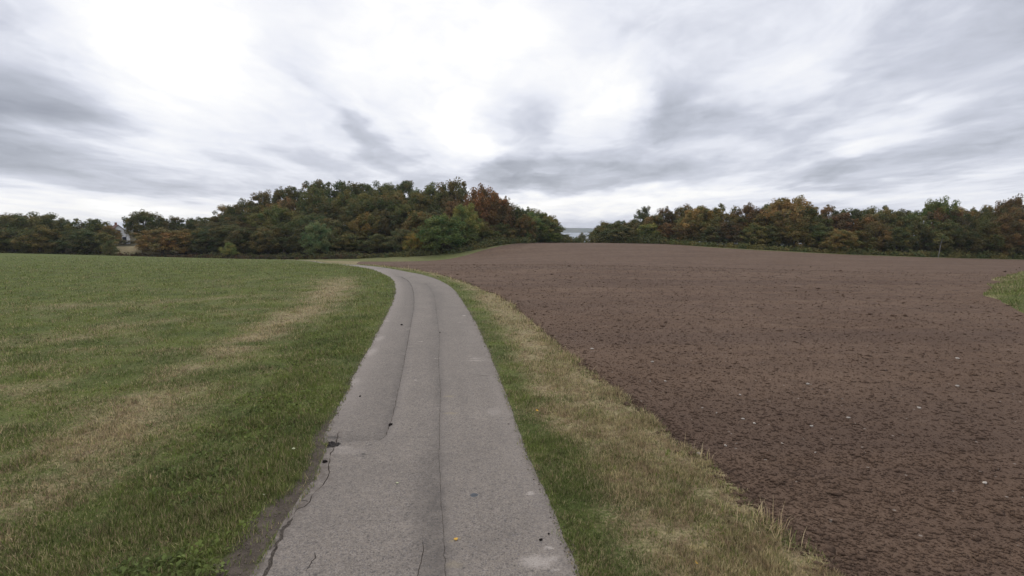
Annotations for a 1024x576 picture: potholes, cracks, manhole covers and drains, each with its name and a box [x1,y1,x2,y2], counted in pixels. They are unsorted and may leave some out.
crack [262,431,340,576]
